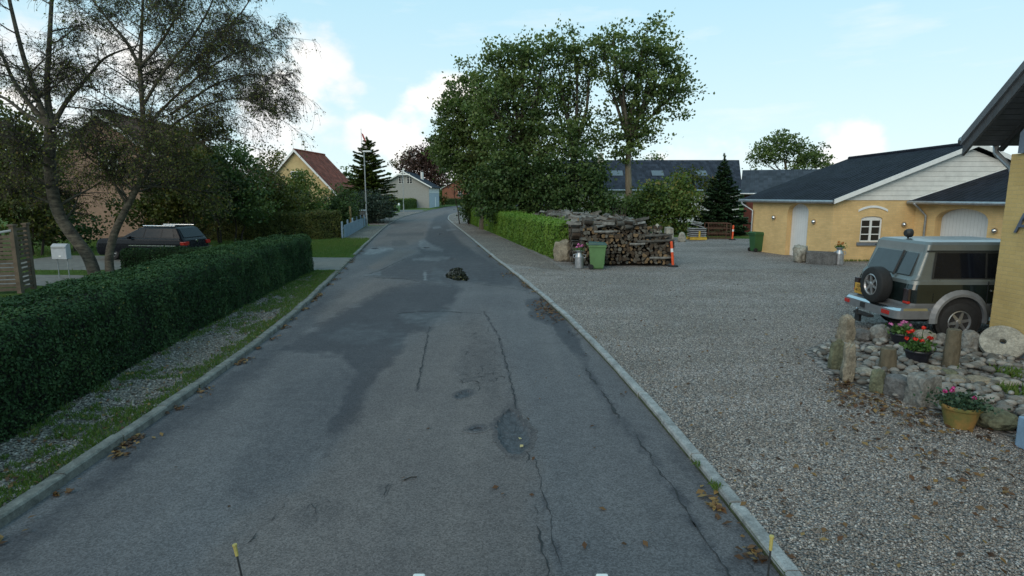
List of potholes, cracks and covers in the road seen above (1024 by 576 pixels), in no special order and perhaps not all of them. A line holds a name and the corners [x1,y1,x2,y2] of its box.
pothole [450,388,478,400]
pothole [462,423,490,434]
pothole [489,406,538,458]
crack [585,368,755,576]
crack [398,311,562,574]
